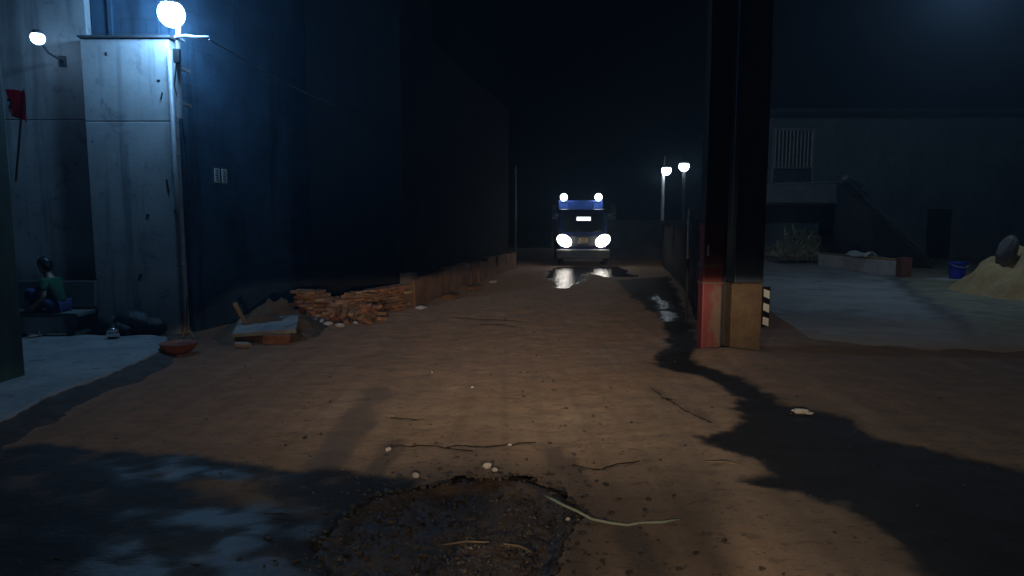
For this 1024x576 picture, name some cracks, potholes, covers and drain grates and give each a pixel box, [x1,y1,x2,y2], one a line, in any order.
crack [456,317,516,327]
crack [652,388,712,423]
crack [388,442,536,451]
pothole [311,476,586,576]
crack [572,460,640,470]
